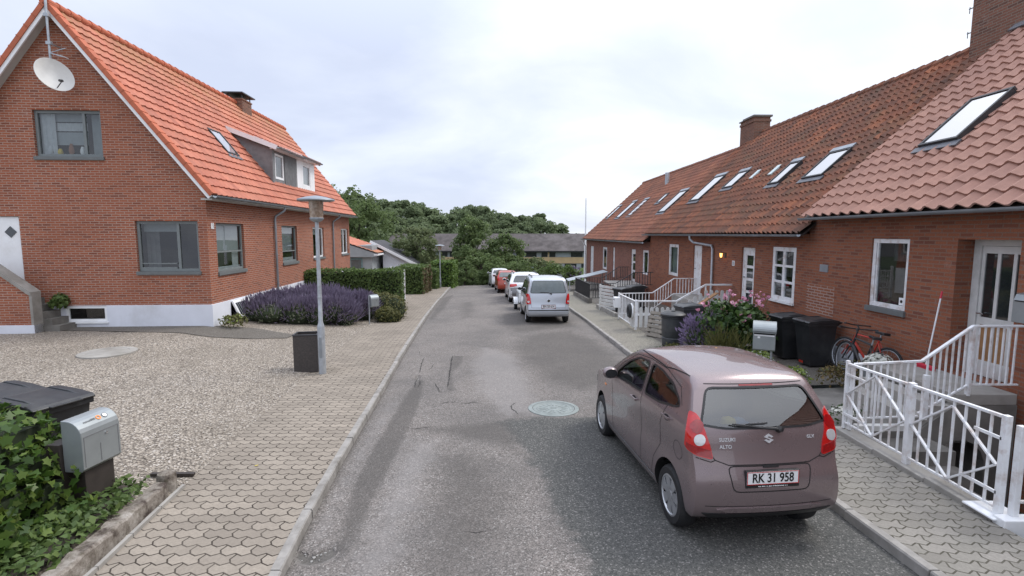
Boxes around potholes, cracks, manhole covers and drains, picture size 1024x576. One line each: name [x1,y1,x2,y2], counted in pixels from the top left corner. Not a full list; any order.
manhole cover [76,346,138,359]
manhole cover [528,401,579,417]
